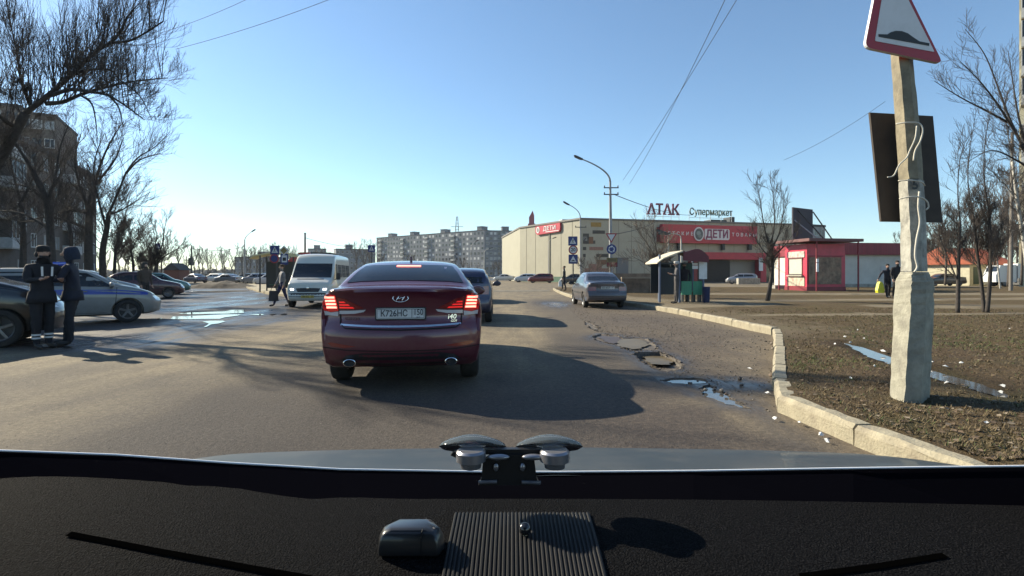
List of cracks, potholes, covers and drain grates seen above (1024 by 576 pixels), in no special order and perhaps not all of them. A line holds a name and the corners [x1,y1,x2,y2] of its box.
pothole [631,351,684,372]
pothole [698,383,752,409]
pothole [659,377,708,385]
pothole [591,334,659,351]
